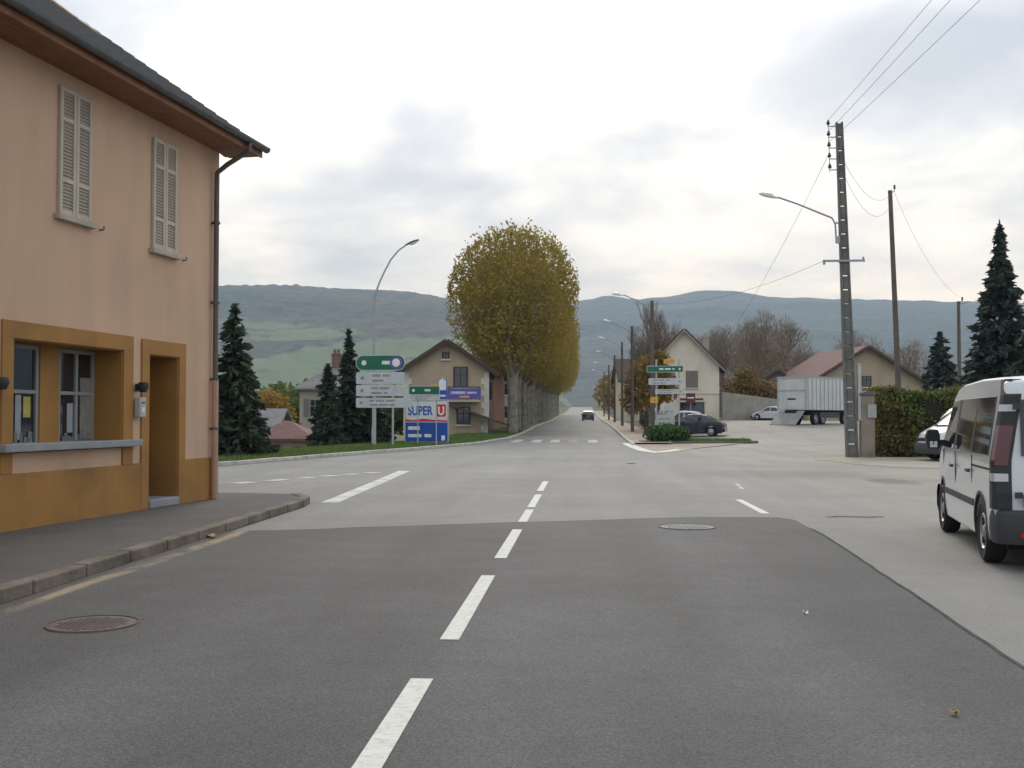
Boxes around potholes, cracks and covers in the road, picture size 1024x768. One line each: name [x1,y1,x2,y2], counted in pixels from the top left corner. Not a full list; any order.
manhole cover [44,615,140,633]
